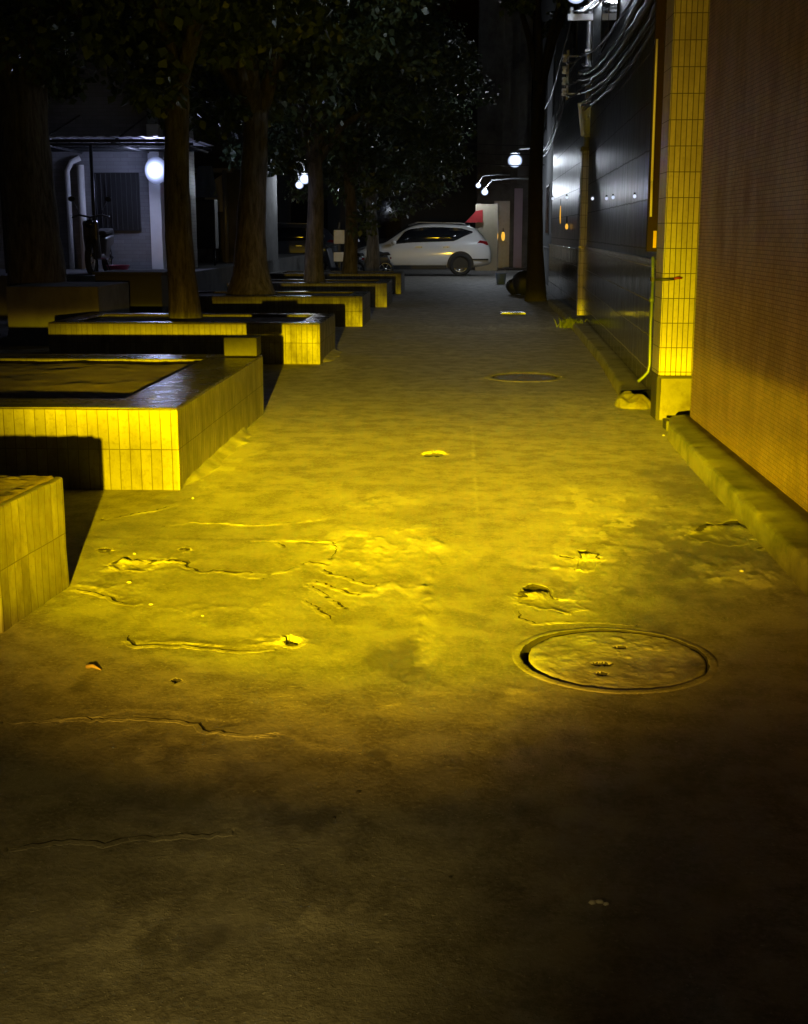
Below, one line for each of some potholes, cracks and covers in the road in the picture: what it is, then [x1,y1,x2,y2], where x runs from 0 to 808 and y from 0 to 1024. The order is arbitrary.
crack [70,504,379,622]
manhole cover [484,373,566,382]
manhole cover [512,627,718,694]
pothole [575,549,607,573]
crack [2,714,280,738]
pothole [508,582,589,615]
pothole [163,676,188,685]
crack [8,828,233,852]
crack [121,634,275,653]
